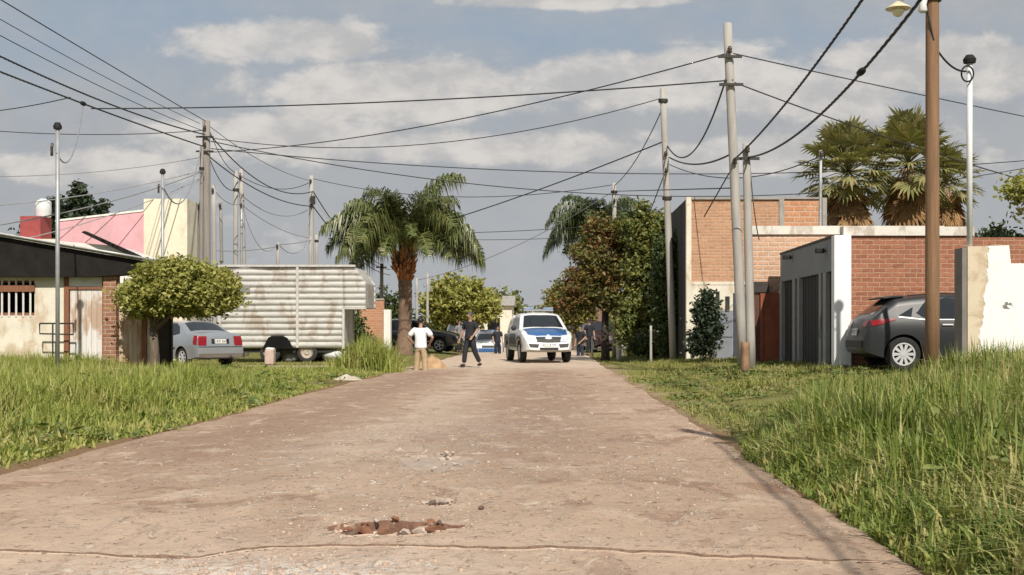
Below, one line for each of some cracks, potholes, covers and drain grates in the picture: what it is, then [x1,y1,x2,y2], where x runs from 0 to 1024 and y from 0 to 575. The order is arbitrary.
crack [0,543,899,564]
pothole [322,516,467,537]
pothole [421,497,456,506]
